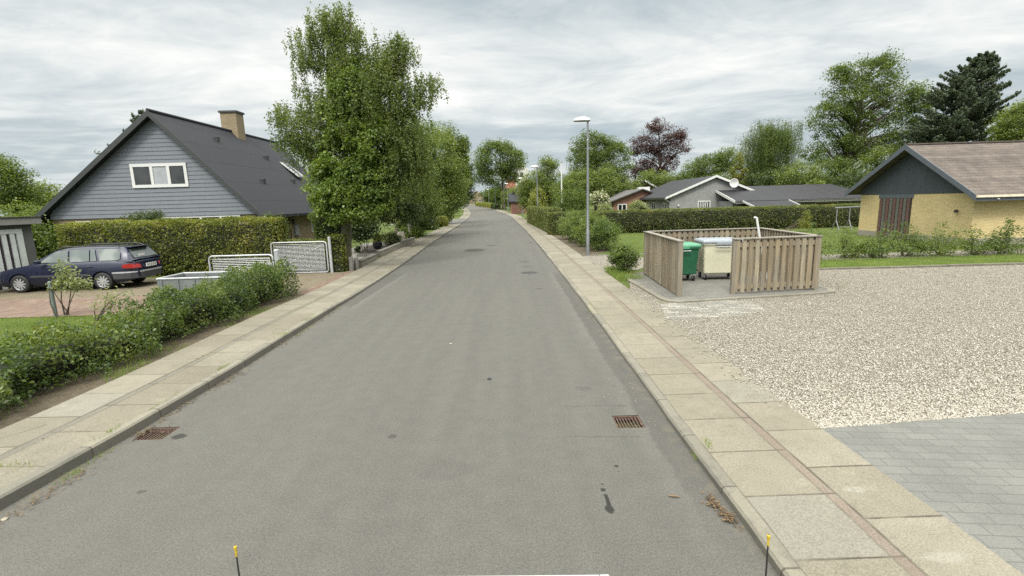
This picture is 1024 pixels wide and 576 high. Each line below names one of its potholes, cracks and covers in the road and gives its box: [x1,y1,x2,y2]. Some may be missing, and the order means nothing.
drain grate [134,427,179,440]
drain grate [612,415,646,428]
